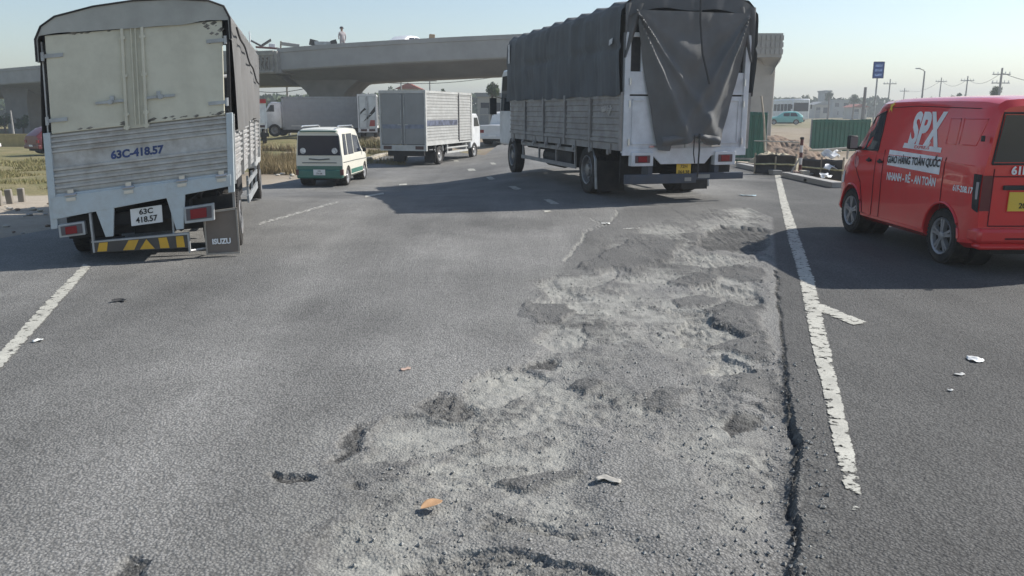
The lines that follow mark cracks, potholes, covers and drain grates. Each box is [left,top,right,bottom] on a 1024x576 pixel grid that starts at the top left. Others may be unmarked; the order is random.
crack [563,209,620,261]
pothole [295,207,800,576]
crack [773,270,805,576]
pothole [268,470,319,484]
pothole [109,553,154,576]
